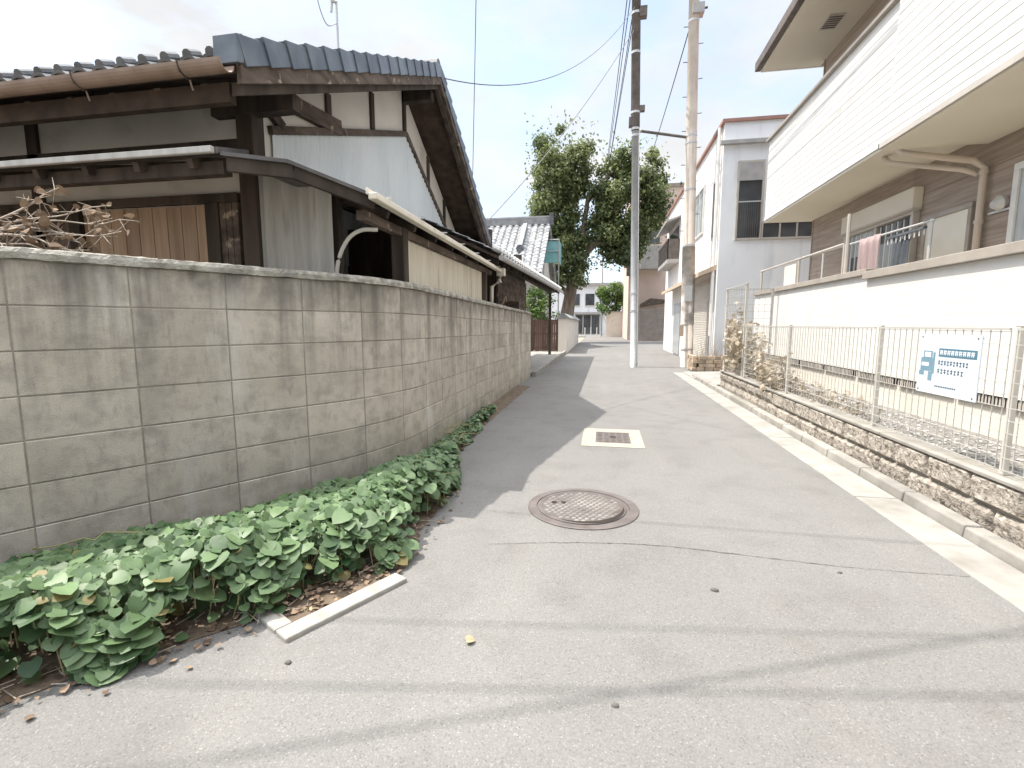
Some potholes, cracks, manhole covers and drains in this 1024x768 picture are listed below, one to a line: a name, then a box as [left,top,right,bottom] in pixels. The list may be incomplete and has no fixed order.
crack [502,542,970,577]
manhole cover [528,488,639,530]
manhole cover [581,428,645,449]
